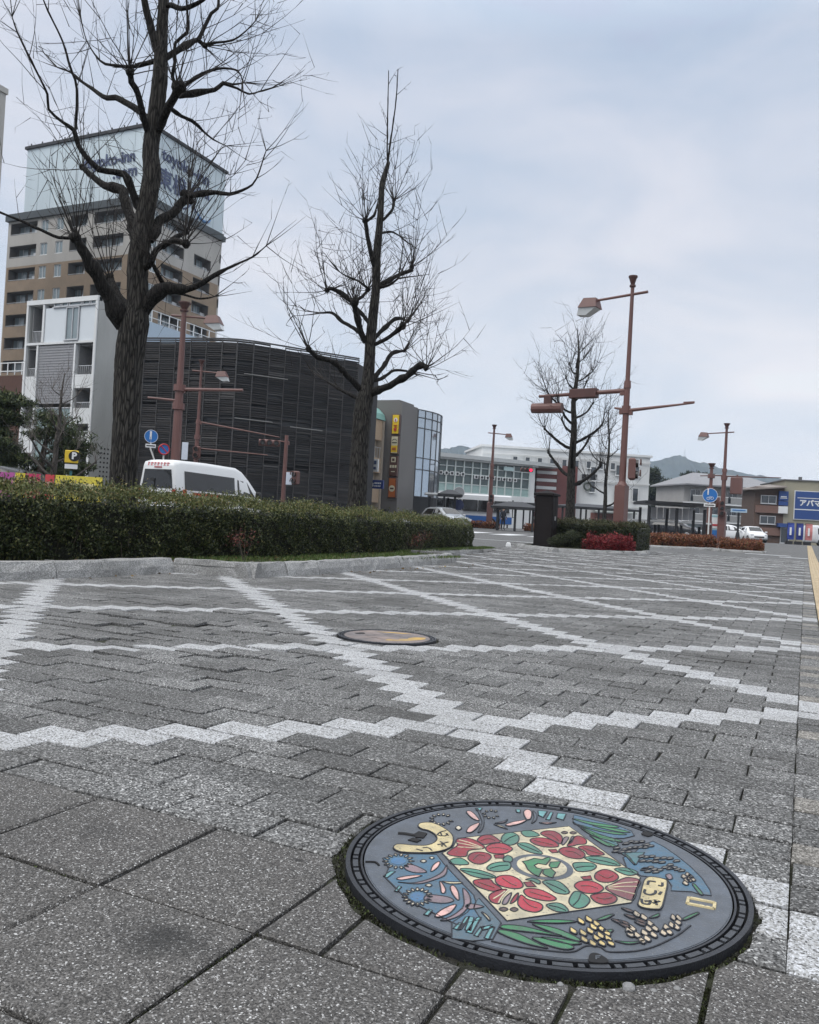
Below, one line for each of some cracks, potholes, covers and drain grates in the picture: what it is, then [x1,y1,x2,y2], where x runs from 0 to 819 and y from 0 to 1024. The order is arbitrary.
manhole cover [345,800,754,985]
manhole cover [338,629,436,647]
